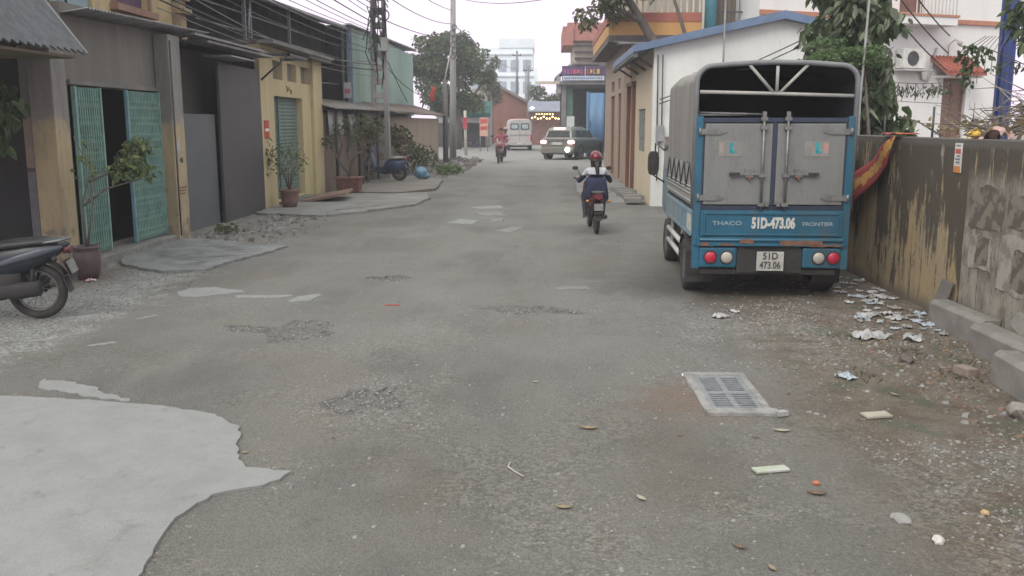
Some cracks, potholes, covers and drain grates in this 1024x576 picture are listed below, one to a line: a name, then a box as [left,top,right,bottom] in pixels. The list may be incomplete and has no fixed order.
pothole [475,305,588,315]
pothole [260,320,336,344]
drain grate [683,372,789,417]
pothole [319,386,408,416]
pothole [223,325,268,333]
